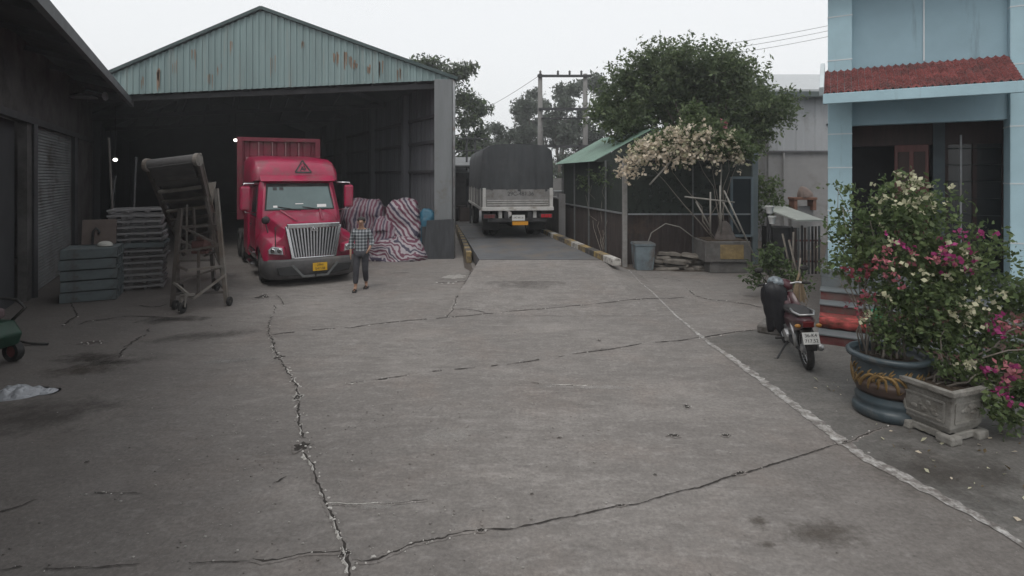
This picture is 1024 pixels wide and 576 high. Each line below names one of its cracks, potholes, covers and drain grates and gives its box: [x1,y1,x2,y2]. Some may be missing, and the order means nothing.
crack [266,294,428,576]
